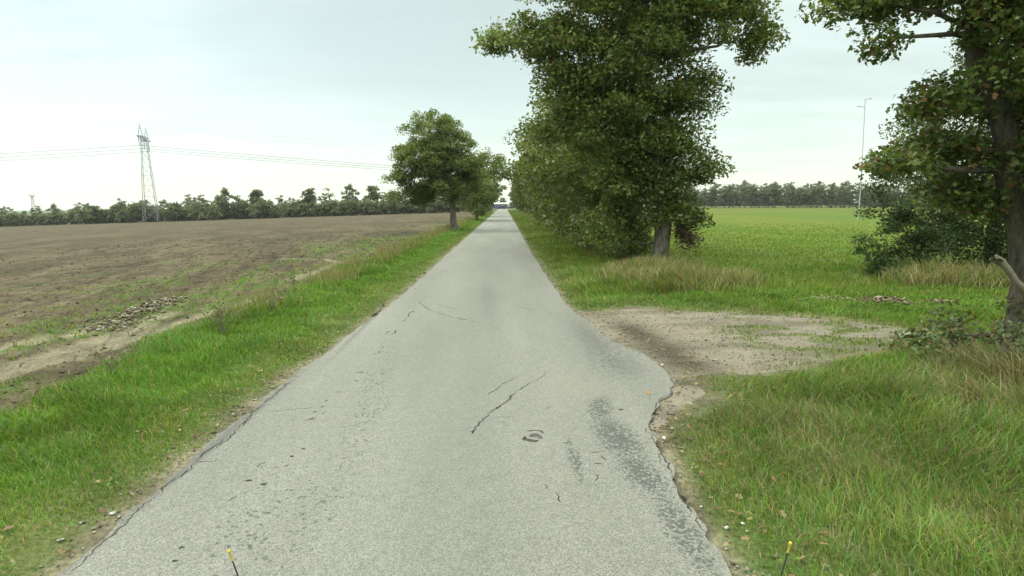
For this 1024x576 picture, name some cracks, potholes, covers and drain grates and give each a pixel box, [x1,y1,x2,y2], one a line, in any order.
pothole [522,430,544,442]
crack [472,372,548,434]
crack [645,389,711,543]
crack [372,304,478,354]
